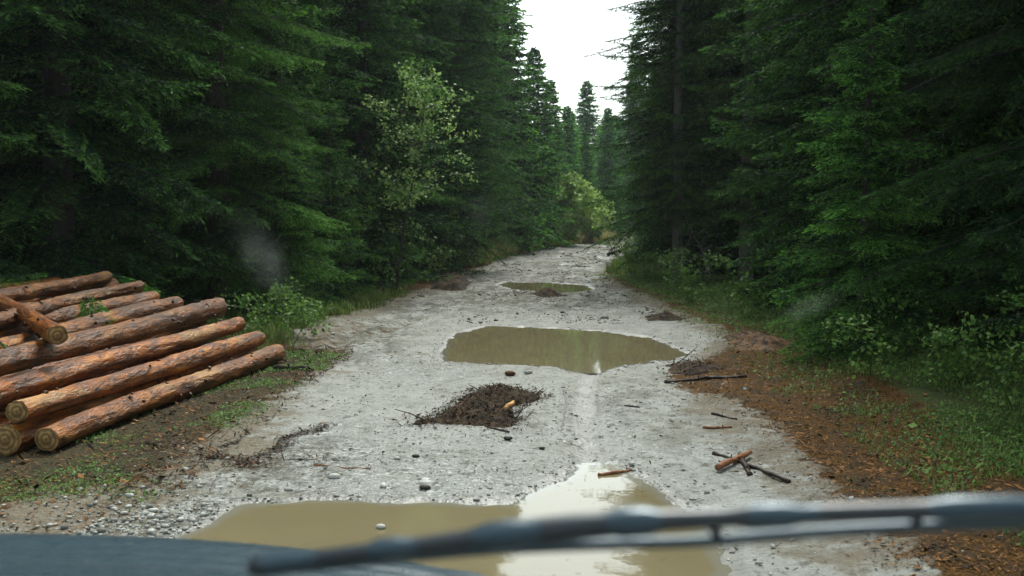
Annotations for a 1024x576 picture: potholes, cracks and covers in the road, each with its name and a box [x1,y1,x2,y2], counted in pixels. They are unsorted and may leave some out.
pothole [435,325,694,375]
pothole [167,461,747,576]
pothole [496,282,594,292]
